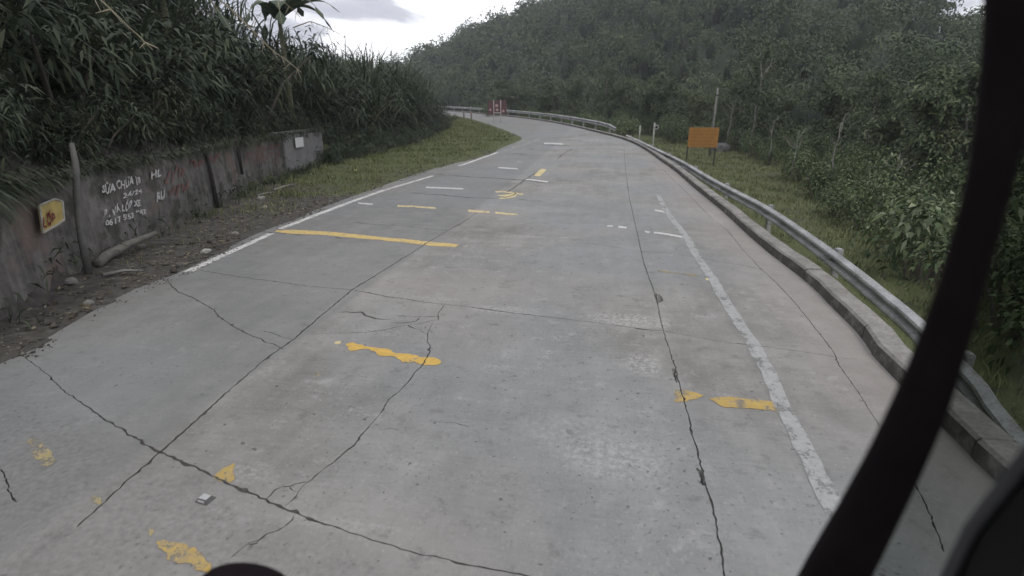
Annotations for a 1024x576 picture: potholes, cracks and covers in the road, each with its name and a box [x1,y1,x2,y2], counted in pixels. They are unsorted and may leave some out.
crack [0,469,17,502]
crack [230,305,445,558]
crack [167,278,293,350]
